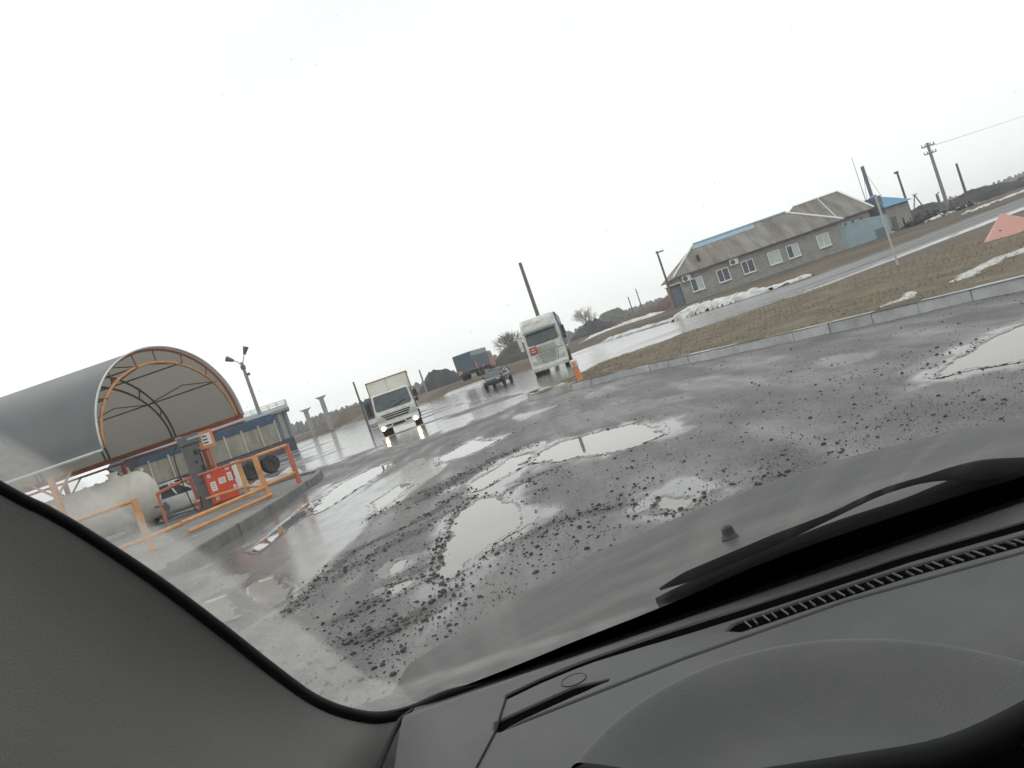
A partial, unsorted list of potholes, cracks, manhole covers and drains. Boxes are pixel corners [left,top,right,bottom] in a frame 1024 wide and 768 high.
pothole [304,462,394,515]
pothole [924,323,1024,379]
pothole [424,492,540,584]
pothole [374,553,421,580]
pothole [517,419,671,465]
pothole [633,489,706,515]
pothole [365,480,419,515]
pothole [462,450,540,493]
pothole [432,437,500,465]
